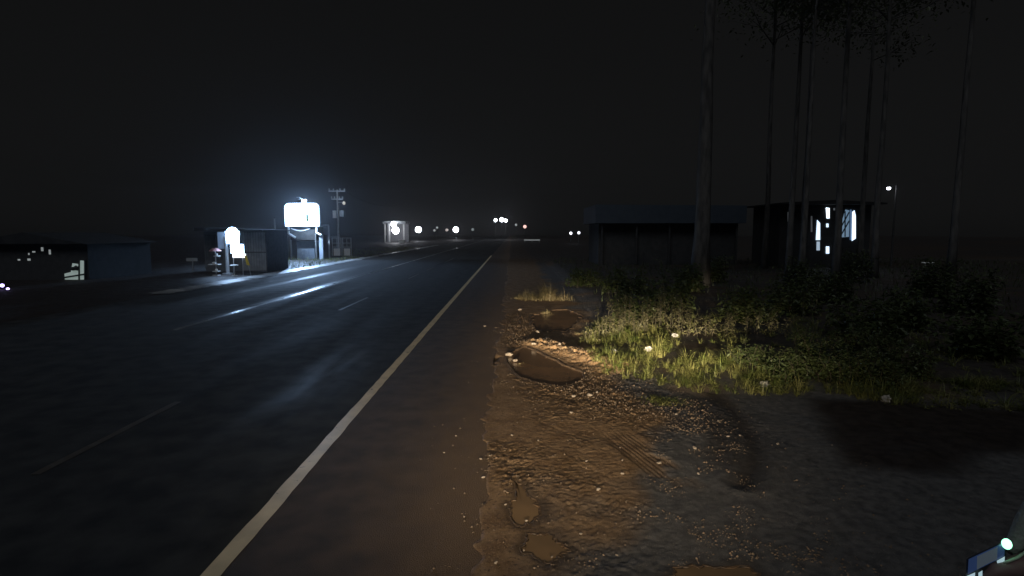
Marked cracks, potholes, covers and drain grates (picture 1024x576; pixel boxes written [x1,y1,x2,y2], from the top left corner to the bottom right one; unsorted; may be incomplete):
pothole [528,309,584,332]
pothole [504,346,588,387]
